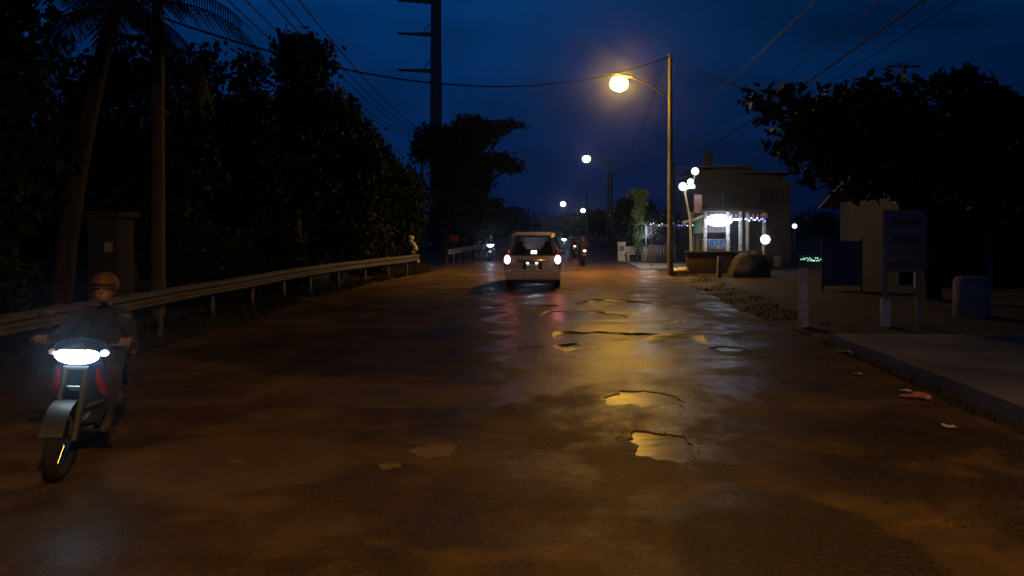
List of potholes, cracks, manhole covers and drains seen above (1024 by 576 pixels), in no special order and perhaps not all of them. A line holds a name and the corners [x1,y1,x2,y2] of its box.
pothole [552,331,708,356]
pothole [628,430,692,464]
pothole [604,390,684,407]
pothole [537,311,629,321]
